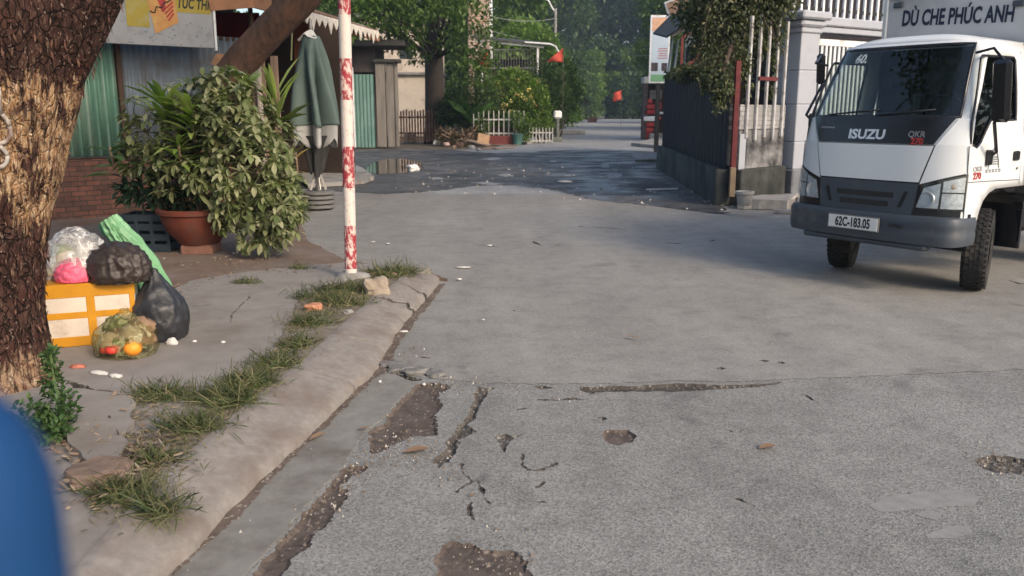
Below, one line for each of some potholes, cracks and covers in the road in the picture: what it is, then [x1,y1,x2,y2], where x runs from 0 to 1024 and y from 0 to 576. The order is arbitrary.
pothole [601,430,637,446]
pothole [368,382,451,454]
pothole [975,455,1024,474]
pothole [252,465,368,576]
pothole [432,541,534,576]
pothole [495,432,527,453]
crack [387,357,495,520]
crack [520,454,558,503]
crack [517,382,782,410]
